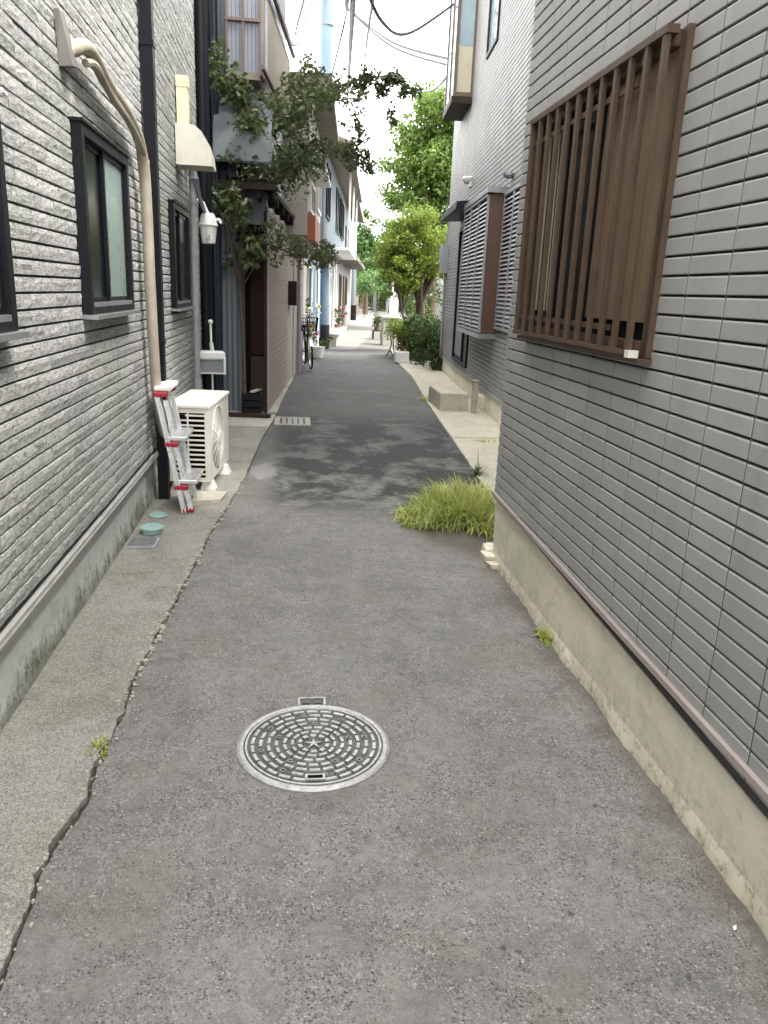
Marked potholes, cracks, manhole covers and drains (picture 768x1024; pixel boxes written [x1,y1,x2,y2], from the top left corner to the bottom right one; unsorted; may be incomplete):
manhole cover [236,697,390,793]
crack [0,494,237,991]
